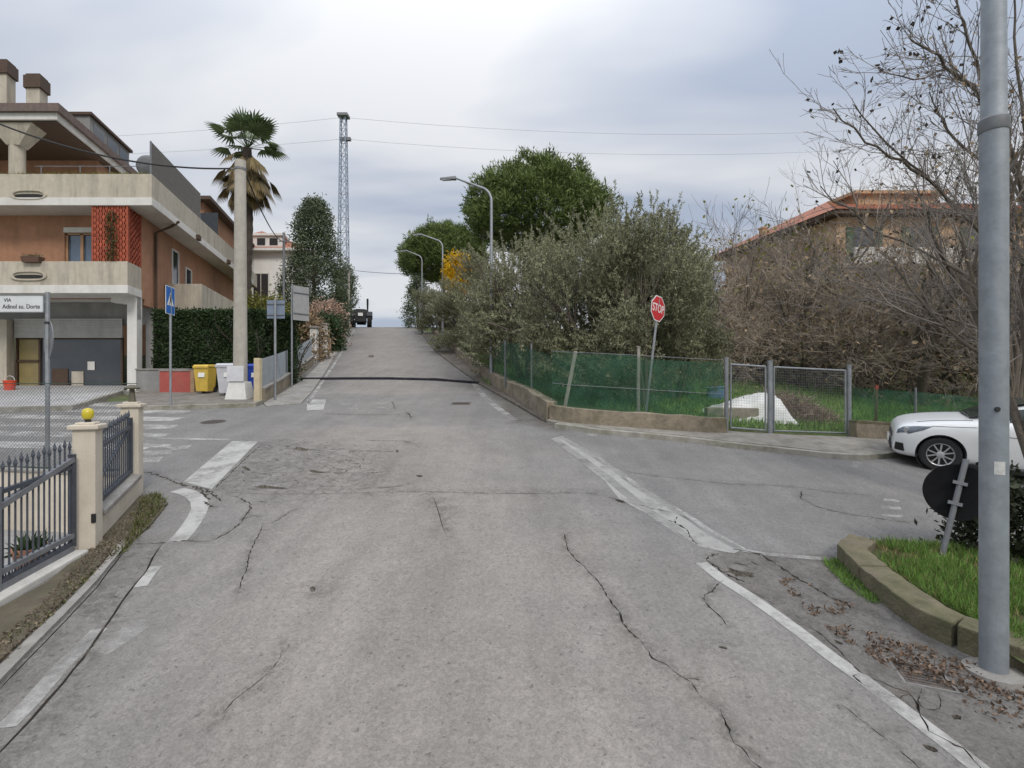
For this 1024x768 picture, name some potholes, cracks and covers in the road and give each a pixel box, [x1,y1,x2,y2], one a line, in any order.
crack [720,709,761,768]
crack [645,474,902,522]
crack [131,440,414,589]
crack [564,534,702,698]
crack [221,651,282,716]
crack [812,628,981,768]
